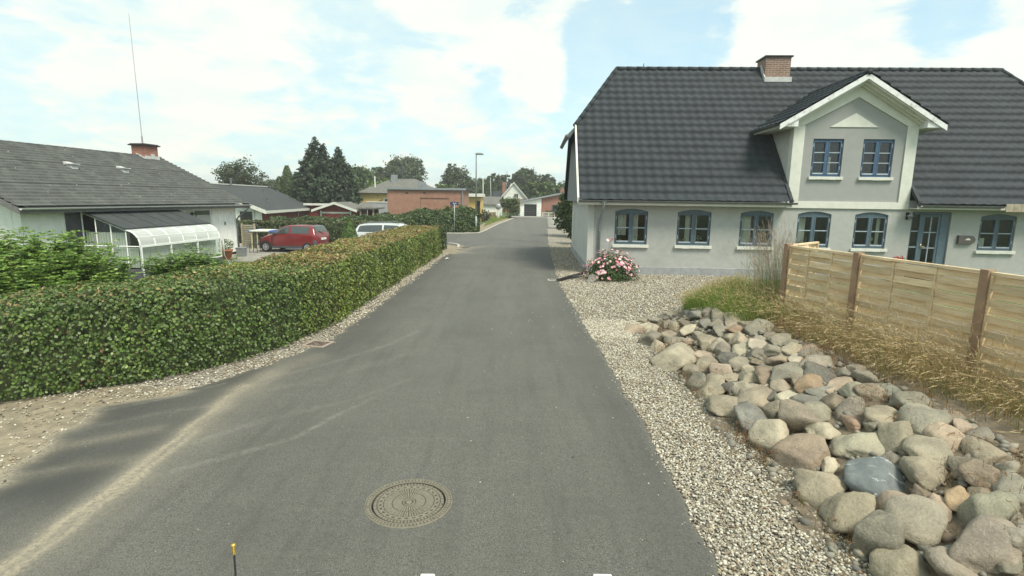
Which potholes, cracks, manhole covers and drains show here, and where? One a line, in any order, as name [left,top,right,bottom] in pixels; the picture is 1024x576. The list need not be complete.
manhole cover [364,479,452,529]
